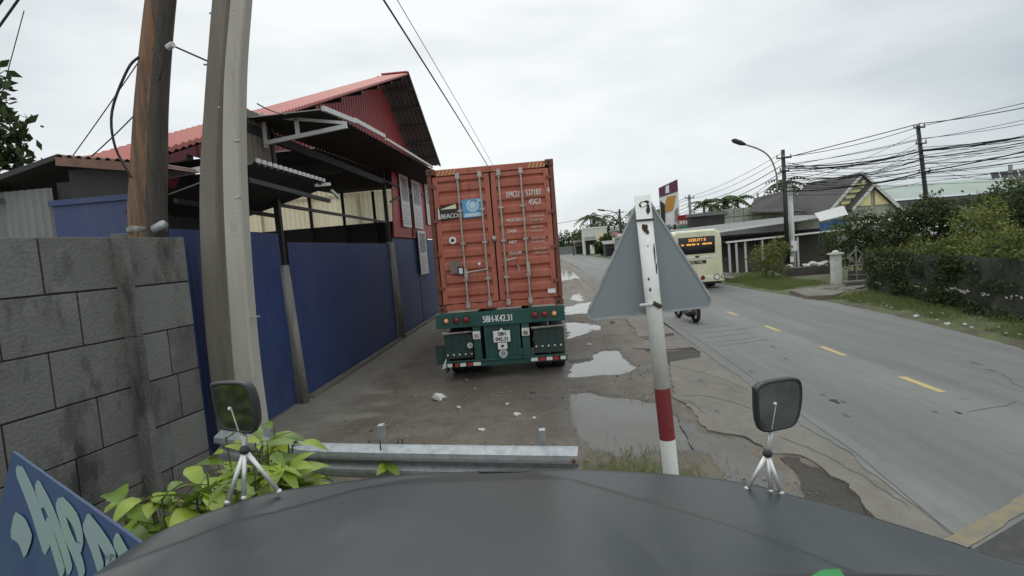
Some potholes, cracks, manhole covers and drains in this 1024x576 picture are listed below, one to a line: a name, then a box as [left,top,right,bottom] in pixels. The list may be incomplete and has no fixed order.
pothole [781,456,865,515]
